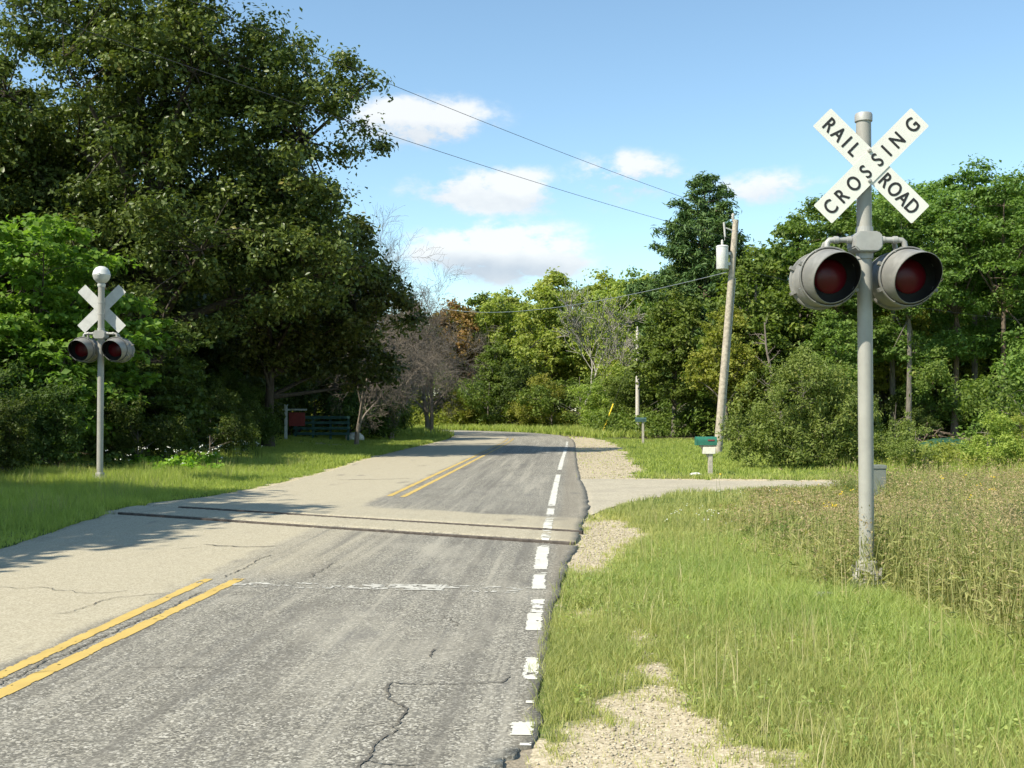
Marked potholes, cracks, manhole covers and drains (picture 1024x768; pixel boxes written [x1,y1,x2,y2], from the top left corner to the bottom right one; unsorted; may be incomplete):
crack [12,587,162,614]
crack [348,674,510,768]
